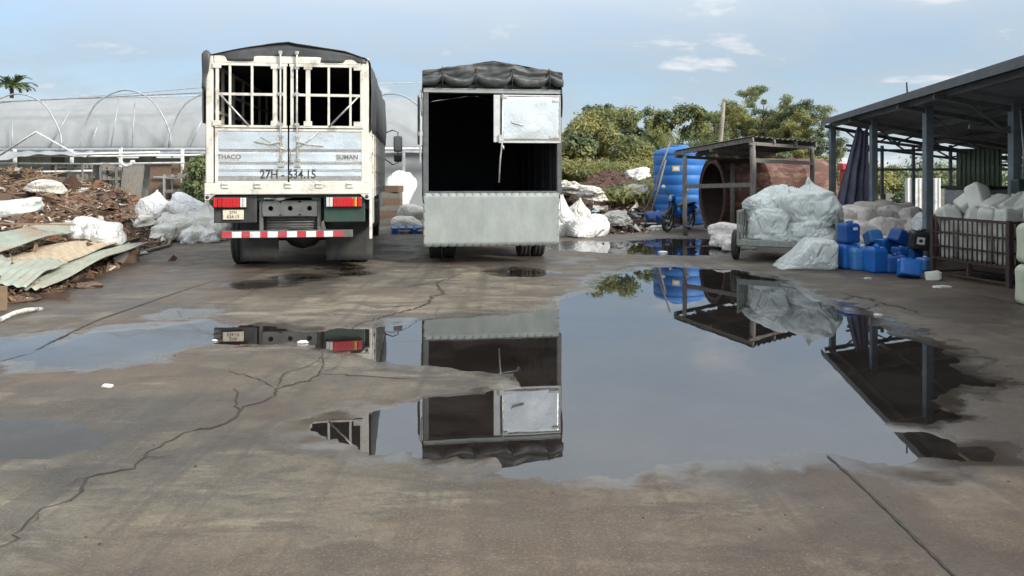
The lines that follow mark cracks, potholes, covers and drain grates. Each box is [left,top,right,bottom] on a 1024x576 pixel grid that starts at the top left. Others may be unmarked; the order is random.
crack [352,273,460,328]
crack [843,293,919,313]
crack [0,353,340,547]
